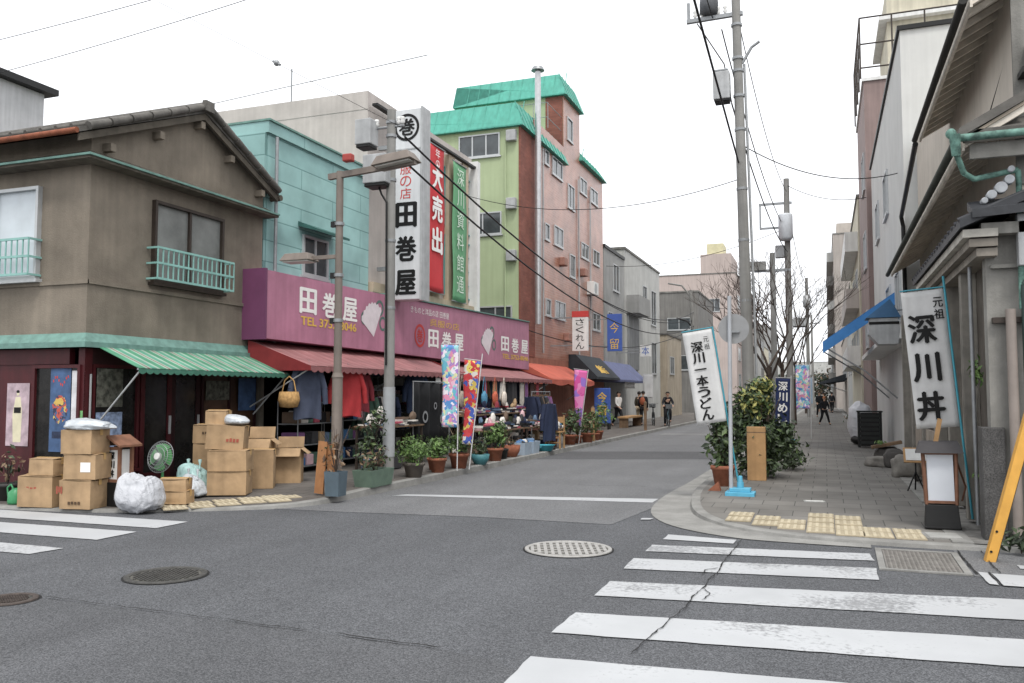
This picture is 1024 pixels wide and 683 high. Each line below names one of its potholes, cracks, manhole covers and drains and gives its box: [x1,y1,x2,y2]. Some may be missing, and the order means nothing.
manhole cover [523,540,614,558]
manhole cover [121,566,210,585]
crack [631,539,742,654]
manhole cover [0,592,42,607]
